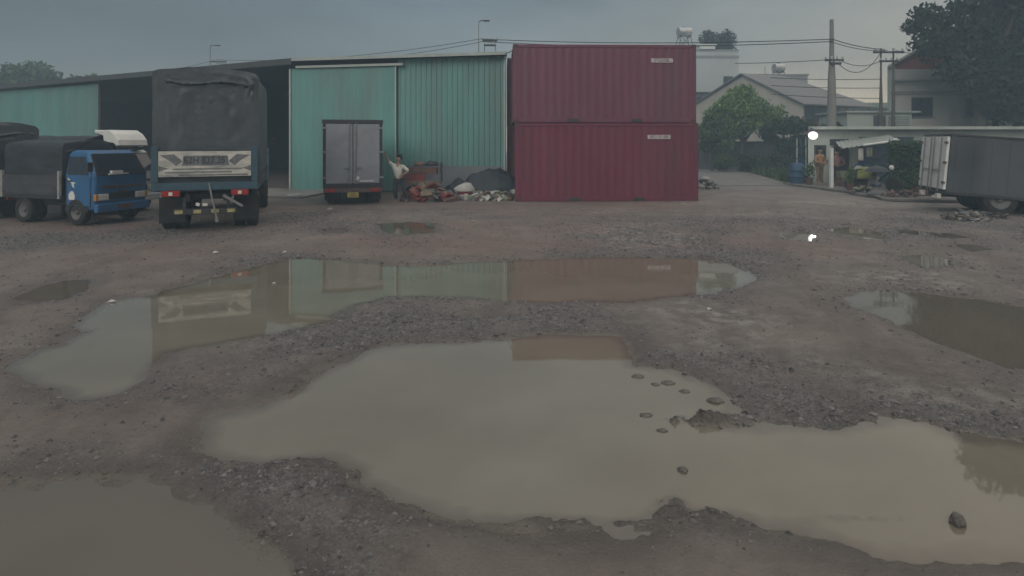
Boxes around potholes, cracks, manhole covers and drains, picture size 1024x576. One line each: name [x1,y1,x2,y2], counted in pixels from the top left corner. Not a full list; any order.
pothole [368,220,445,236]
pothole [888,250,972,270]
pothole [820,224,904,242]
pothole [0,454,351,576]
pothole [828,285,1024,373]
pothole [160,326,1024,576]
pothole [0,253,769,407]
